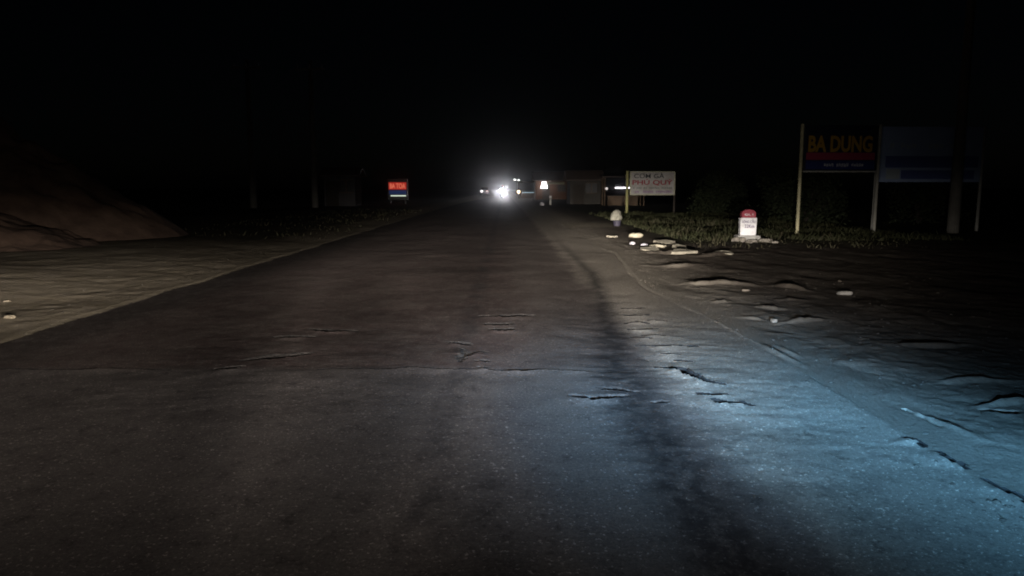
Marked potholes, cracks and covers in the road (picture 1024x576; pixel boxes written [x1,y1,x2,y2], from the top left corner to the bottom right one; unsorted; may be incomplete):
crack [0,307,756,406]
crack [900,408,1024,503]
